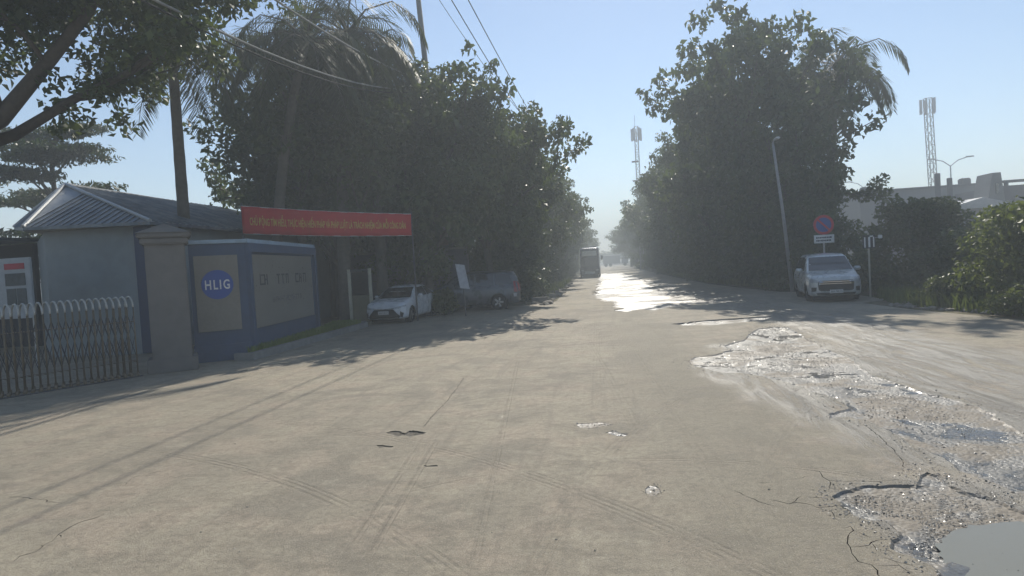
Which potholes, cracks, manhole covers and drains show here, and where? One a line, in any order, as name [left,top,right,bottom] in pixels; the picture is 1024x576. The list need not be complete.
pothole [832,472,1024,576]
pothole [676,316,771,326]
pothole [645,486,661,496]
pothole [687,327,1024,496]
crack [739,426,915,576]
